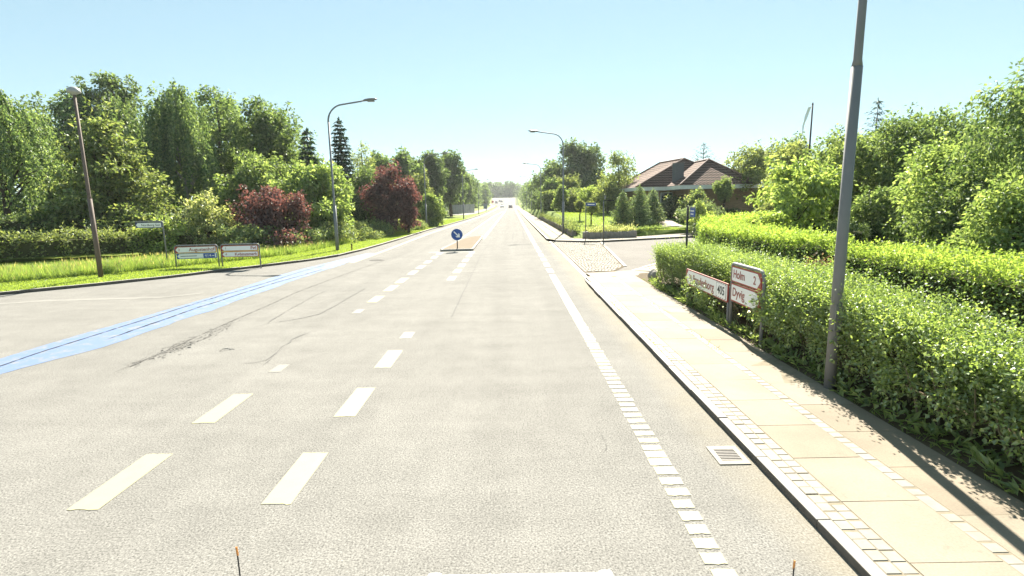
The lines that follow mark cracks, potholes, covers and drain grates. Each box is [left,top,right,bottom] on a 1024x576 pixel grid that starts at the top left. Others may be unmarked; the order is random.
drain grate [705,446,751,465]
crack [0,266,322,366]
crack [247,274,372,365]
